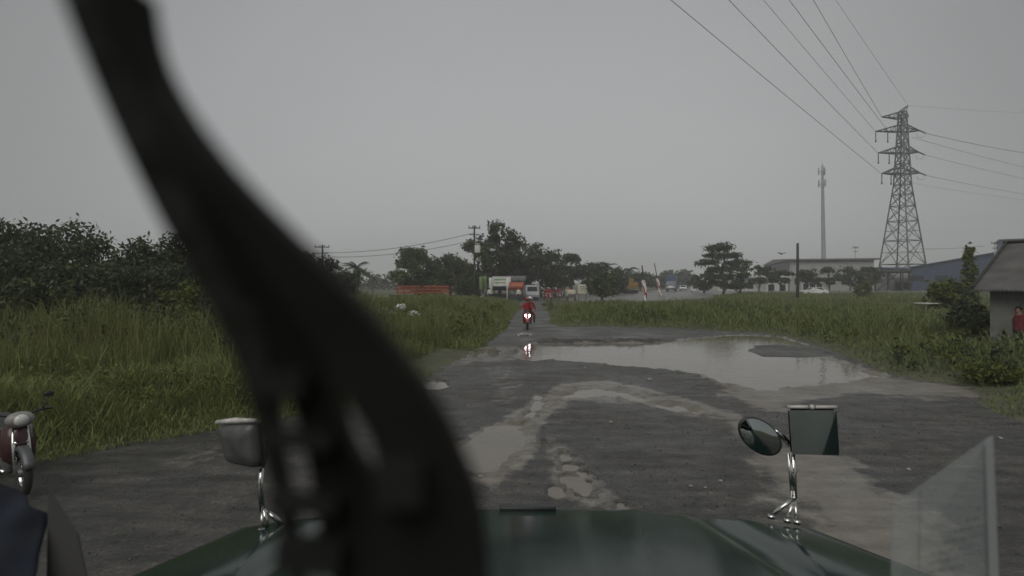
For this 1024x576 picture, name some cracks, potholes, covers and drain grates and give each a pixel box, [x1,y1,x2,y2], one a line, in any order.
pothole [573,467,596,481]
pothole [545,385,710,416]
pothole [552,448,579,462]
pothole [513,333,895,390]
pothole [552,472,599,499]
pothole [461,418,537,475]
pothole [428,378,455,391]
pothole [543,482,575,500]
pothole [555,459,587,472]
